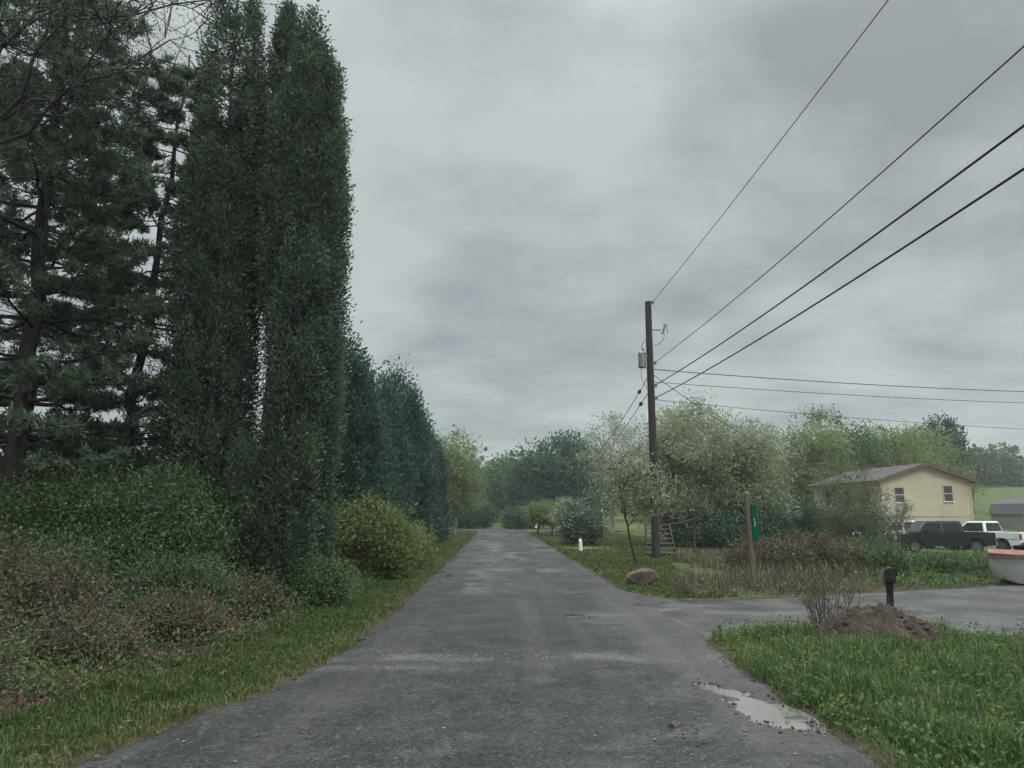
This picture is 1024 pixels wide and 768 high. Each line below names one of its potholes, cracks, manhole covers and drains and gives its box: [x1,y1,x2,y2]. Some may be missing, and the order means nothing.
pothole [692,681,827,734]
